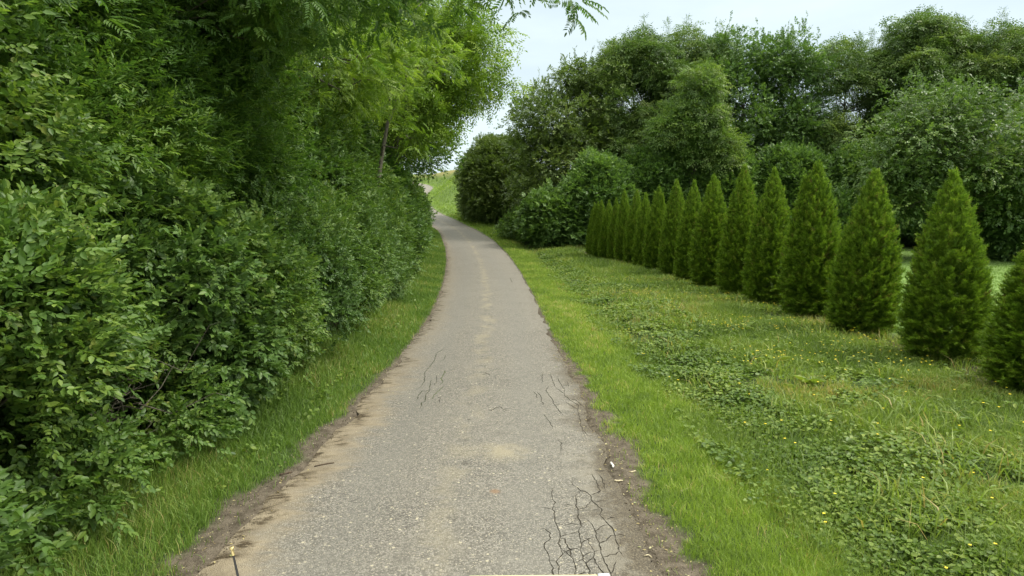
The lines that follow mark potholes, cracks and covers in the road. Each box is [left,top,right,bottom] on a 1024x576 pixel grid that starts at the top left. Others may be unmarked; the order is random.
crack [537,475,625,576]
crack [417,348,446,408]
crack [533,375,592,451]
